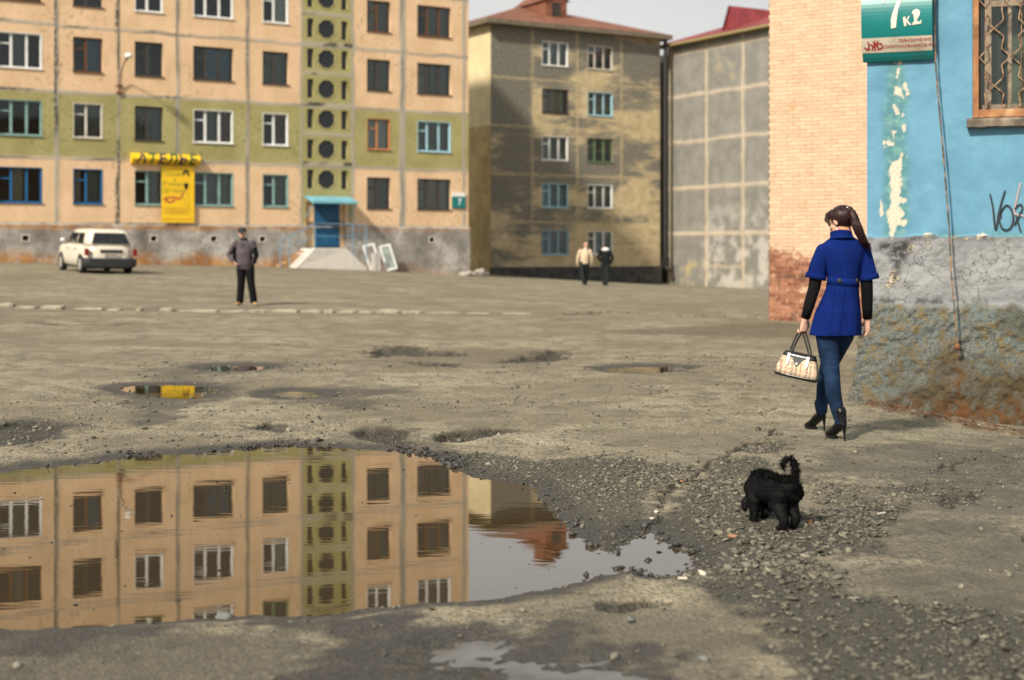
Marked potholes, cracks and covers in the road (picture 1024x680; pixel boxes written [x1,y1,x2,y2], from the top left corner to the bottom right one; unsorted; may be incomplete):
pothole [252,387,341,400]
pothole [0,440,717,632]
pothole [339,622,541,680]
pothole [102,382,232,399]
pothole [591,363,696,373]
pothole [352,344,474,358]
pothole [347,426,436,449]
pothole [478,348,582,364]
pothole [0,419,75,445]
pothole [429,426,529,443]
pothole [185,362,284,372]
